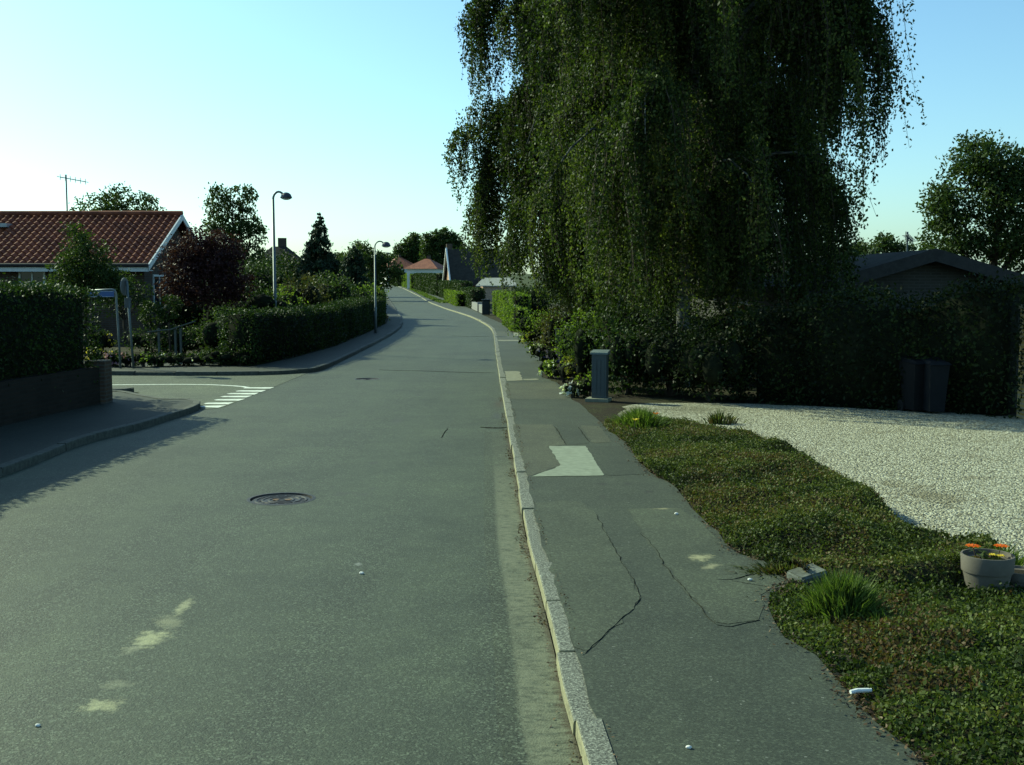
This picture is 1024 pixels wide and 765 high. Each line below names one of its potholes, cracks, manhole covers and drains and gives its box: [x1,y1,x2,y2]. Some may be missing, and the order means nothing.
crack [596,514,640,605]
crack [640,533,767,627]
manhole cover [247,492,316,505]
